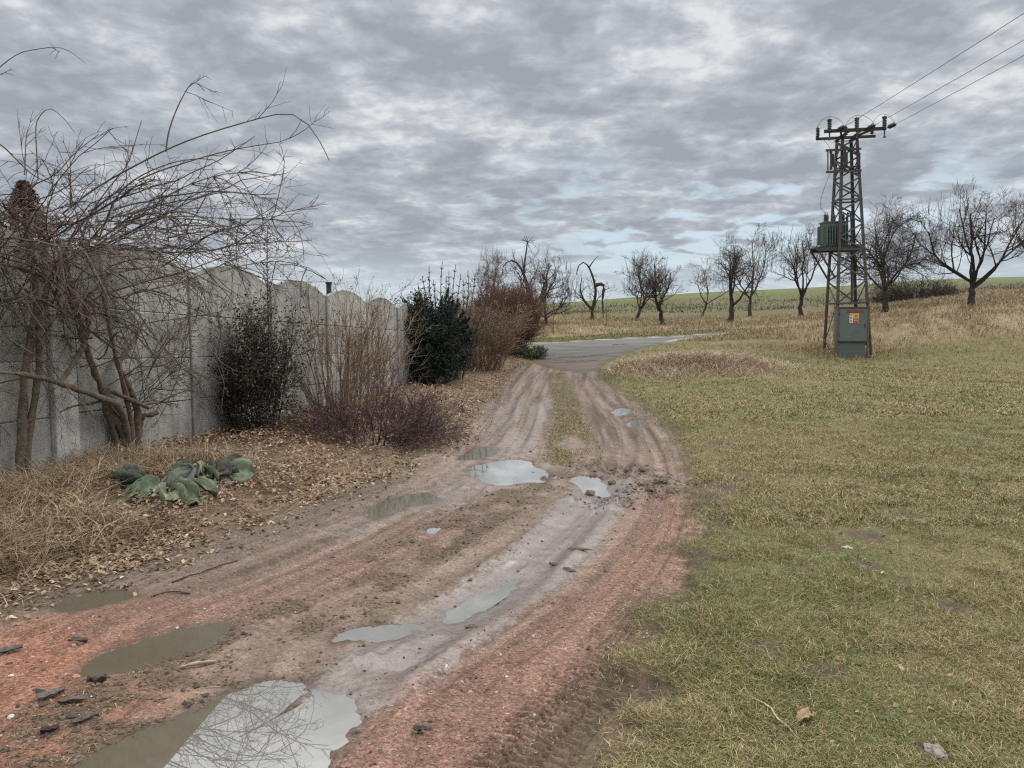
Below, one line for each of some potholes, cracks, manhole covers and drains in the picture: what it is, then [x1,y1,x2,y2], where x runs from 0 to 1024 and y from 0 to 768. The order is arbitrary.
pothole [28,583,151,616]
pothole [559,474,621,498]
pothole [607,408,636,416]
pothole [452,445,504,461]
pothole [319,618,427,647]
pothole [424,573,534,628]
pothole [459,458,560,486]
pothole [56,613,249,683]
pothole [352,491,449,521]
pothole [622,419,650,427]
pothole [56,668,383,768]
